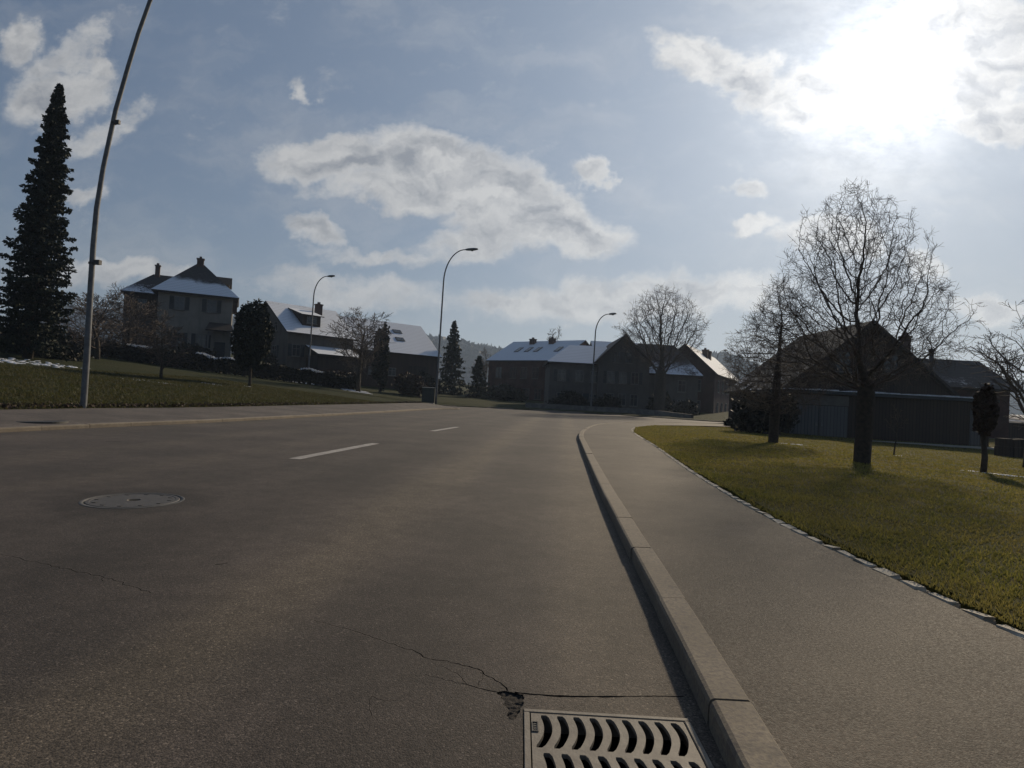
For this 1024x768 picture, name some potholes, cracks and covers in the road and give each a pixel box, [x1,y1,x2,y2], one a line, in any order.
drain grate [523,709,714,768]
manhole cover [78,493,185,509]
crack [314,620,685,698]
pothole [497,691,524,720]
